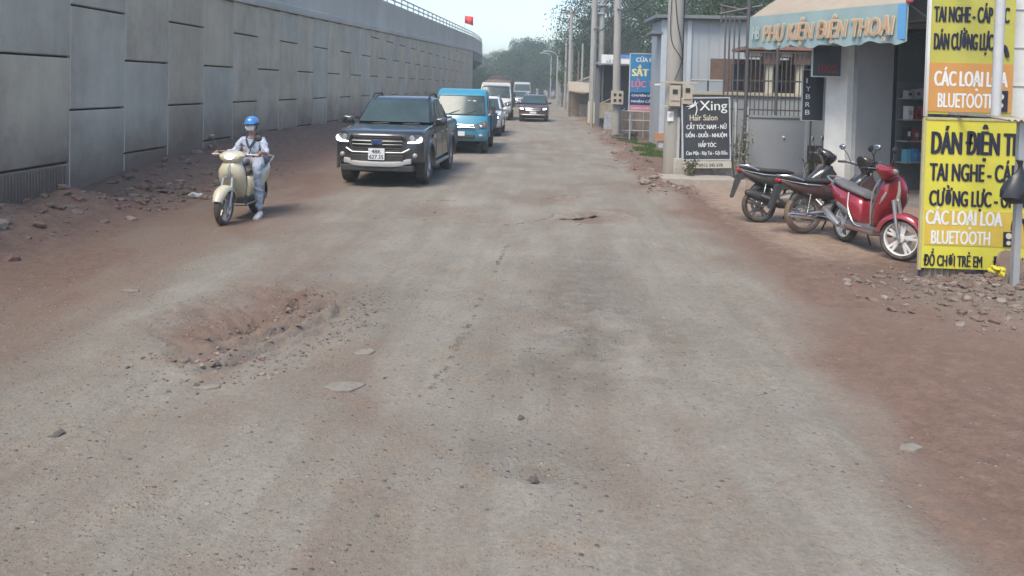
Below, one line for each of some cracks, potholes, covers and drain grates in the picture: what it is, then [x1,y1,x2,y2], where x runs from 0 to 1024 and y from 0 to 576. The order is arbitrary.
pothole [546,209,642,227]
pothole [127,280,357,379]
